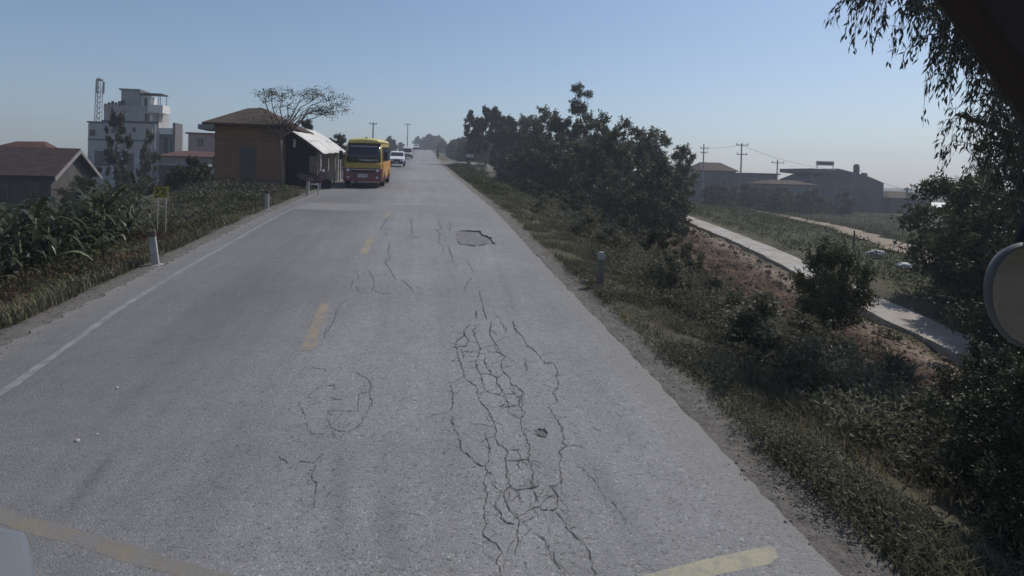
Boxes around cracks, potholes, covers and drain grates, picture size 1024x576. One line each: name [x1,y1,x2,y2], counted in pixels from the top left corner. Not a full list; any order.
crack [279,367,372,512]
crack [324,219,414,339]
pothole [456,230,495,247]
crack [429,308,626,576]
